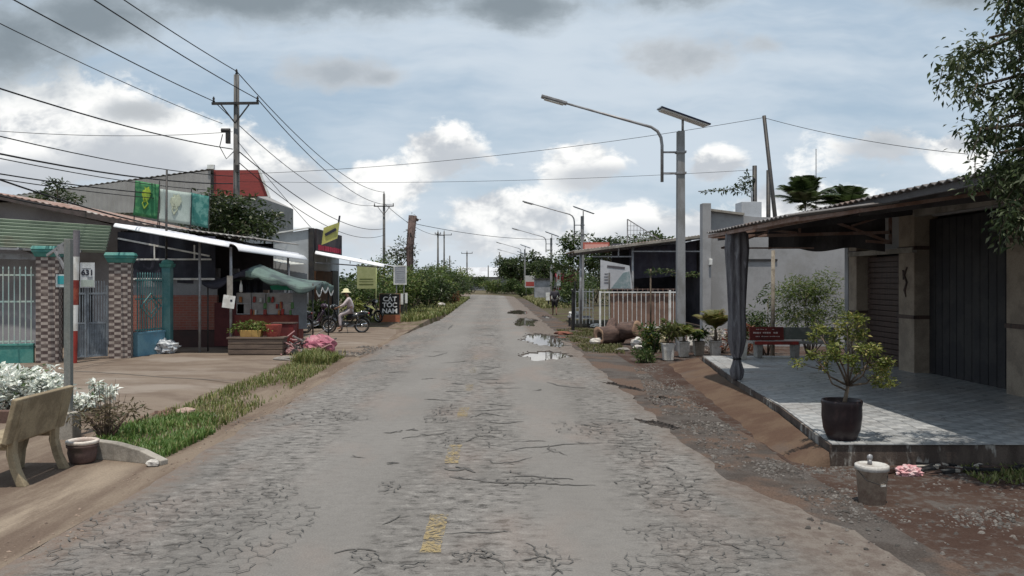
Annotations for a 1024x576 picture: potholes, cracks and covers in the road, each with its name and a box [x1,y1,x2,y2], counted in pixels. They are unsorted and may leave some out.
crack [335,547,382,573]
pothole [518,333,569,348]
pothole [634,418,681,430]
crack [42,482,321,576]
crack [383,351,793,576]
pothole [513,317,539,326]
pothole [518,350,573,361]
